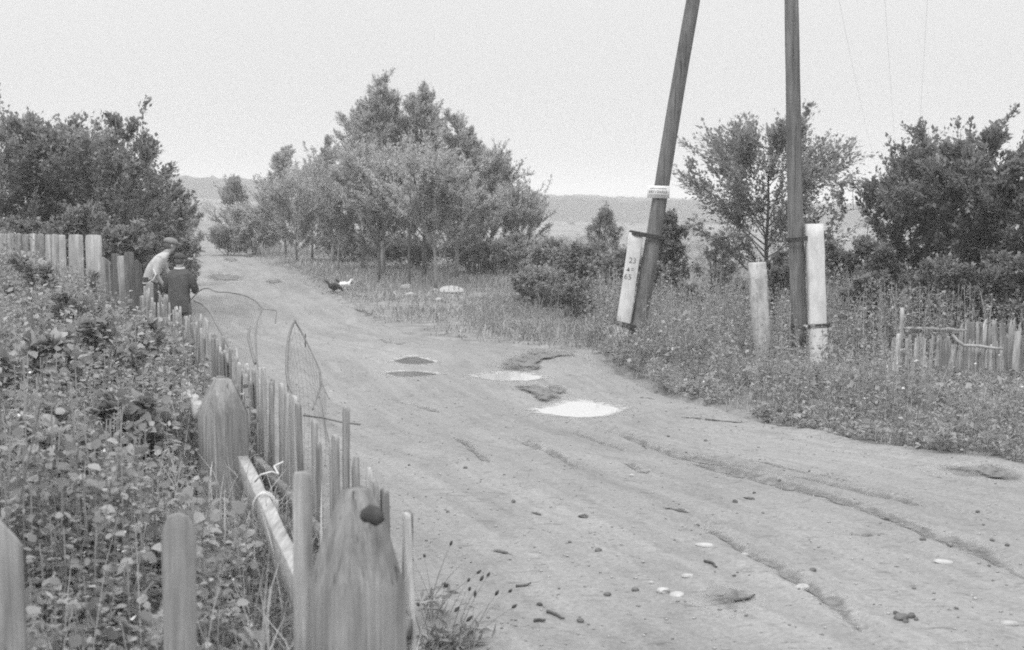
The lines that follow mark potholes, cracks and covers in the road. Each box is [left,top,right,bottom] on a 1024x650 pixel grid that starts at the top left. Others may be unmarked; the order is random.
pothole [388,355,438,364]
pothole [470,371,549,381]
pothole [528,399,628,418]
